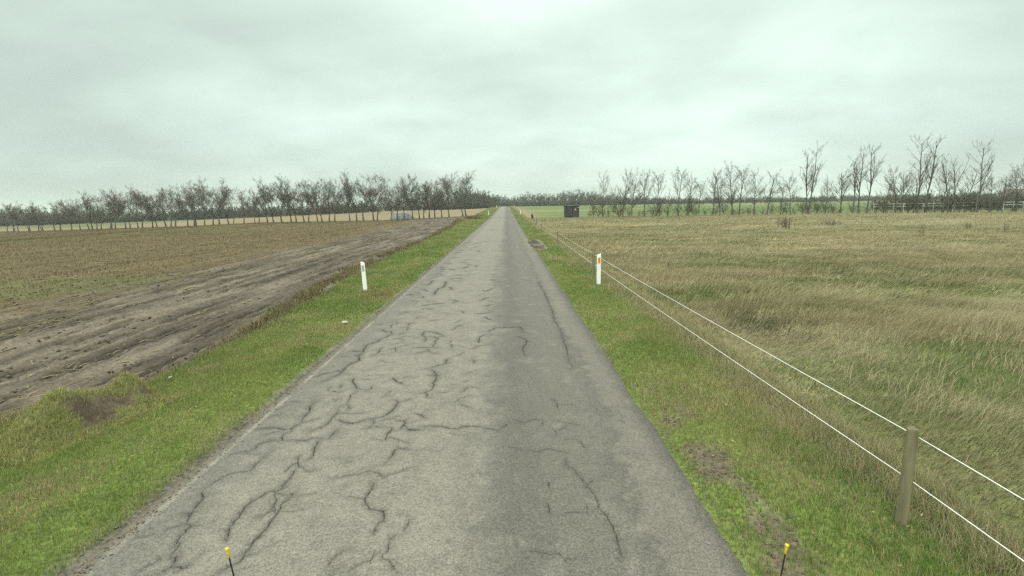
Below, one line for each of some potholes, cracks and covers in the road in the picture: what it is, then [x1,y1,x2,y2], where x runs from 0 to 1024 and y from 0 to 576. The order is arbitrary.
crack [228,241,498,562]
